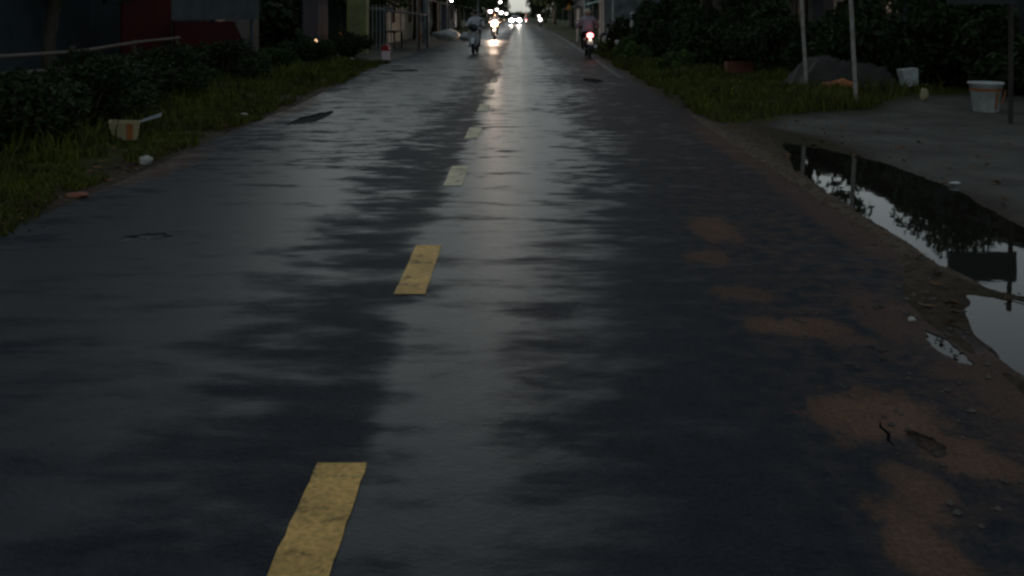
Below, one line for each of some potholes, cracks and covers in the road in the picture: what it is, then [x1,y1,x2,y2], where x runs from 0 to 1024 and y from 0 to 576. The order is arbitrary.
pothole [904,430,947,458]
pothole [284,110,334,126]
crack [879,422,896,448]
pothole [926,331,975,366]
pothole [119,233,173,241]
